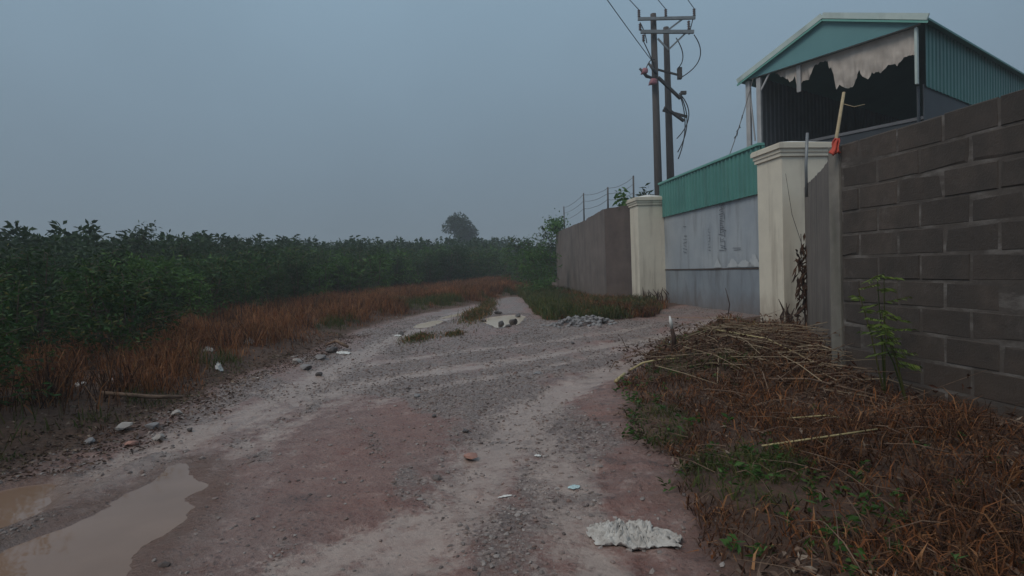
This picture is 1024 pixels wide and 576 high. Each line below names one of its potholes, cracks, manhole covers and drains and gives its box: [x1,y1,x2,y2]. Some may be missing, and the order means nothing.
pothole [0,458,224,576]
pothole [481,314,528,328]
